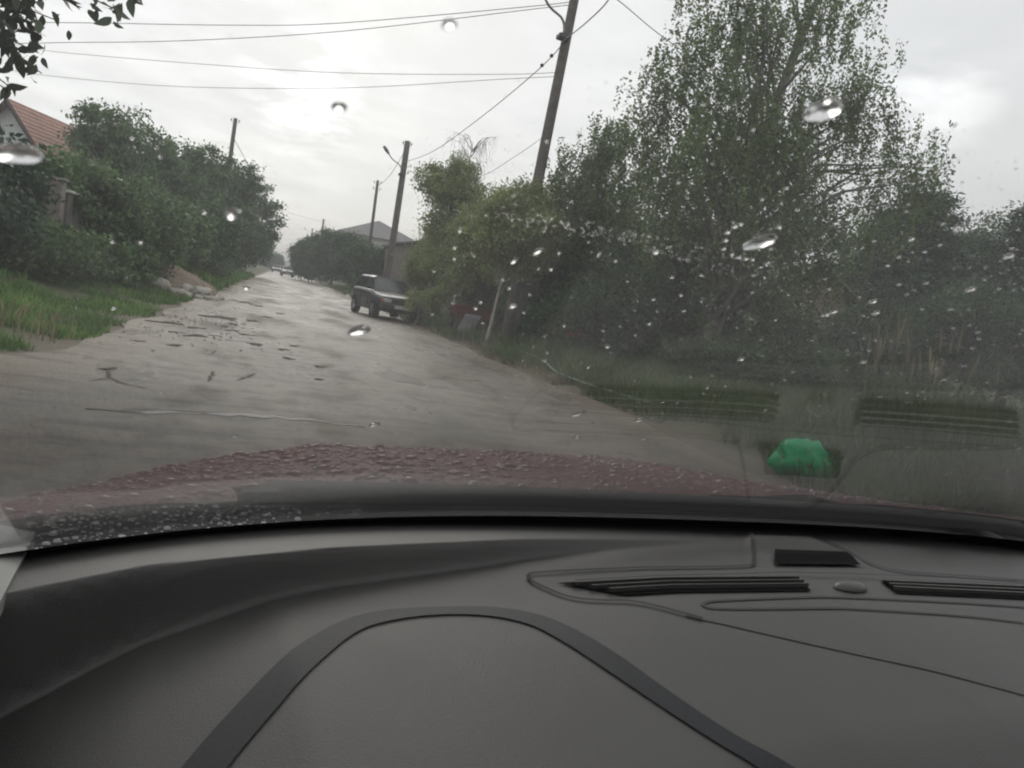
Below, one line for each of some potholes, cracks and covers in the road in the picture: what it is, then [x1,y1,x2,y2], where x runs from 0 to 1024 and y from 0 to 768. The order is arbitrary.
crack [87,370,144,388]
